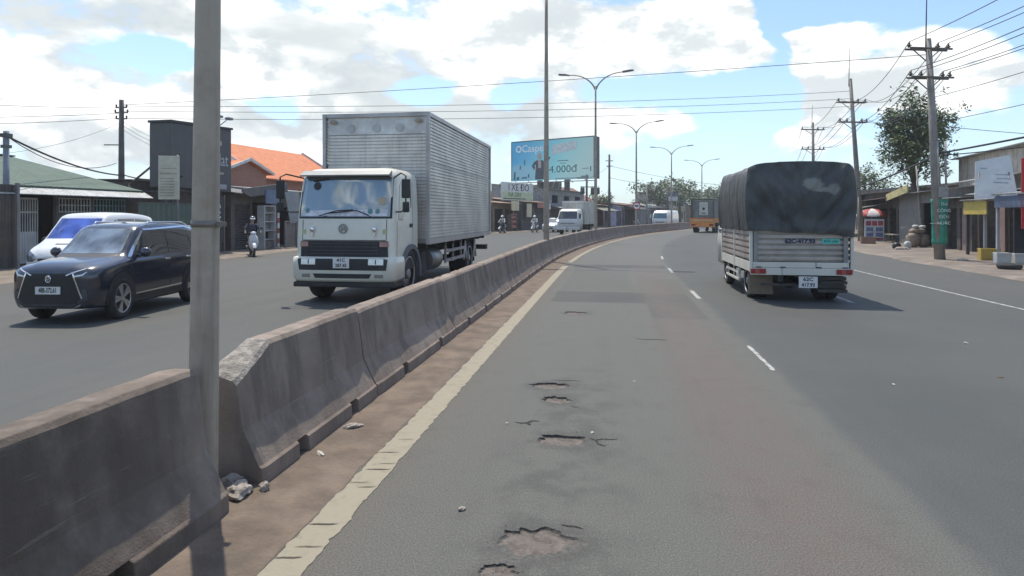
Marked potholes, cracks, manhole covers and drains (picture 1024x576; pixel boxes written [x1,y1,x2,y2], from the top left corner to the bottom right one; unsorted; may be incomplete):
pothole [495,527,589,560]
pothole [542,396,573,404]
pothole [537,434,588,448]
pothole [478,563,520,576]
